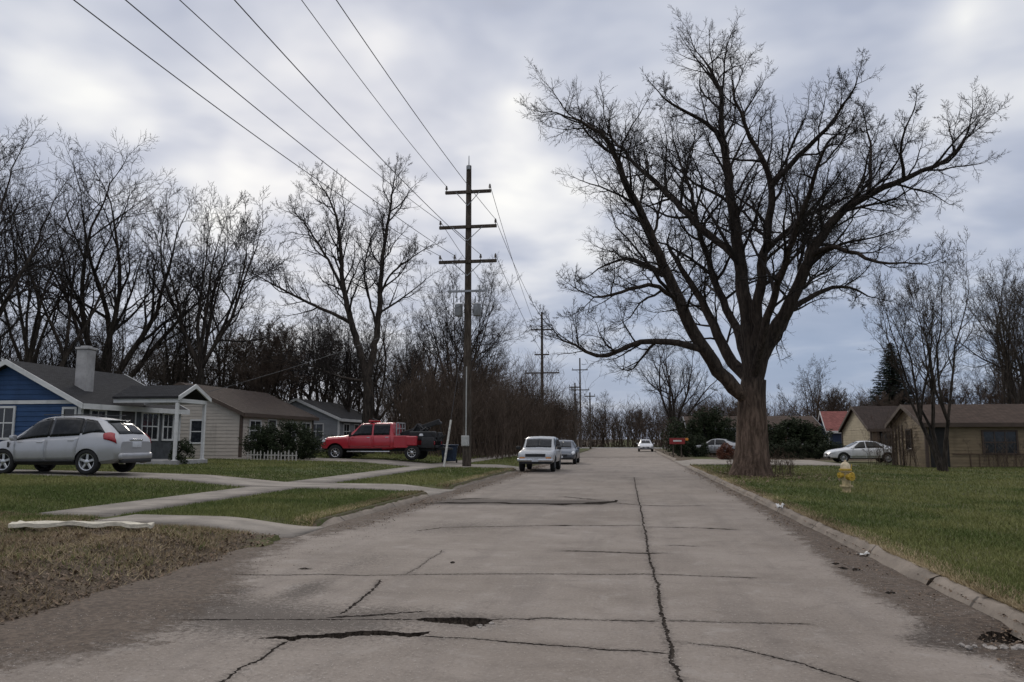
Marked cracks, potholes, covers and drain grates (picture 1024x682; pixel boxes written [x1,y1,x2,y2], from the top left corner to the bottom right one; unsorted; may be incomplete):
pothole [416,617,493,627]
crack [425,477,859,682]
crack [220,641,288,682]
crack [340,580,382,614]
pothole [977,630,1024,644]
